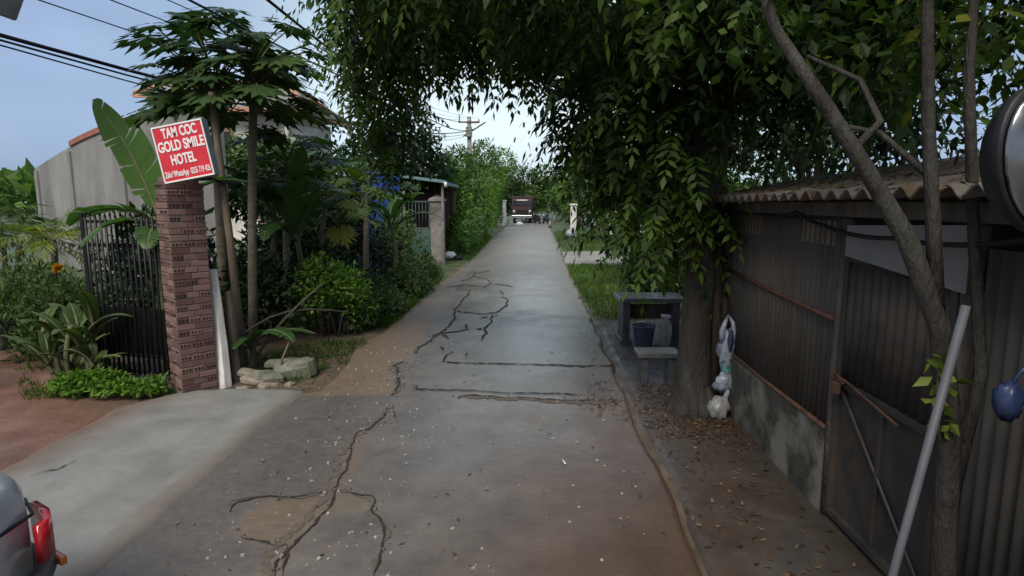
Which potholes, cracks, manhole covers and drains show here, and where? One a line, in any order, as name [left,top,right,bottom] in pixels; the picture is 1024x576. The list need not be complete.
crack [227,270,512,576]
